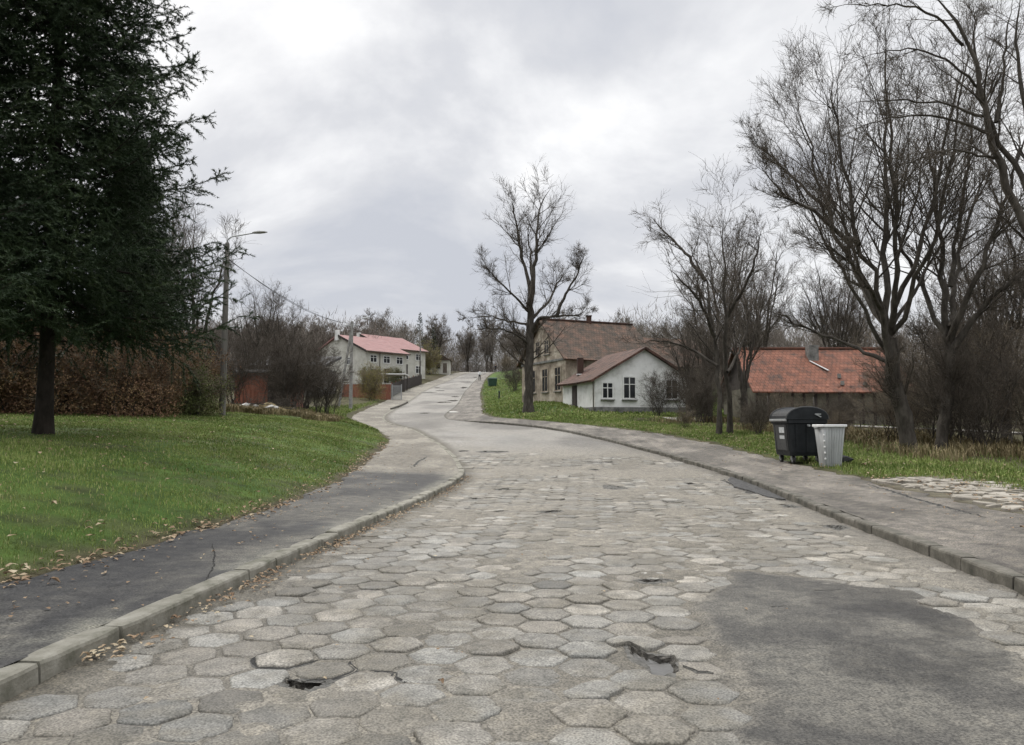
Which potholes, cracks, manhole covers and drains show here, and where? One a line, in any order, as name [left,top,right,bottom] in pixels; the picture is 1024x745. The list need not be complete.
pothole [276,678,335,692]
pothole [623,645,687,677]
crack [206,544,216,580]
